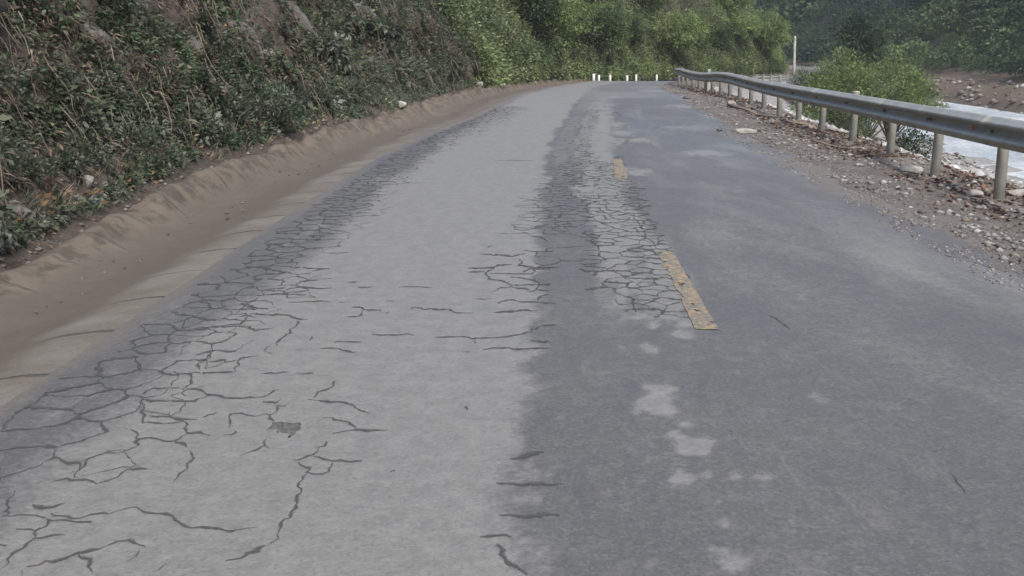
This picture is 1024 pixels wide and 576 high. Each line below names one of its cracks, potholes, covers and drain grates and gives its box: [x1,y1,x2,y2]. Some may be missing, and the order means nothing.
crack [411,109,705,352]
crack [509,451,544,459]
crack [0,107,528,575]
pothole [267,421,301,438]
crack [480,512,558,574]
